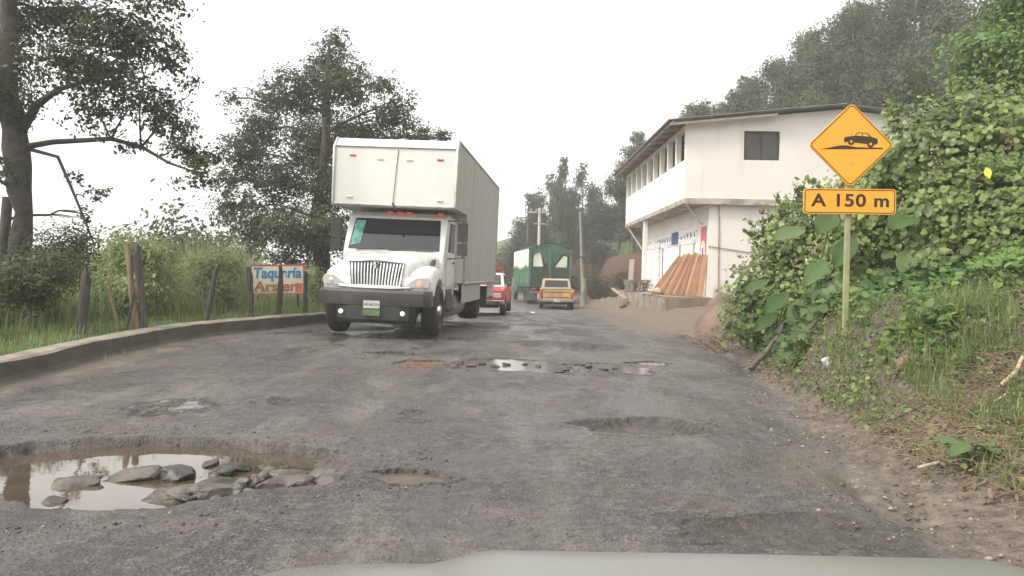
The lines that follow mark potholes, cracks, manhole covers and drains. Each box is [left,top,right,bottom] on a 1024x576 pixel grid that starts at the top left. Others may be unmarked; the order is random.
pothole [387,359,457,369]
pothole [432,357,587,375]
pothole [549,415,735,439]
pothole [347,467,467,488]
pothole [563,362,660,376]
pothole [0,433,393,520]
